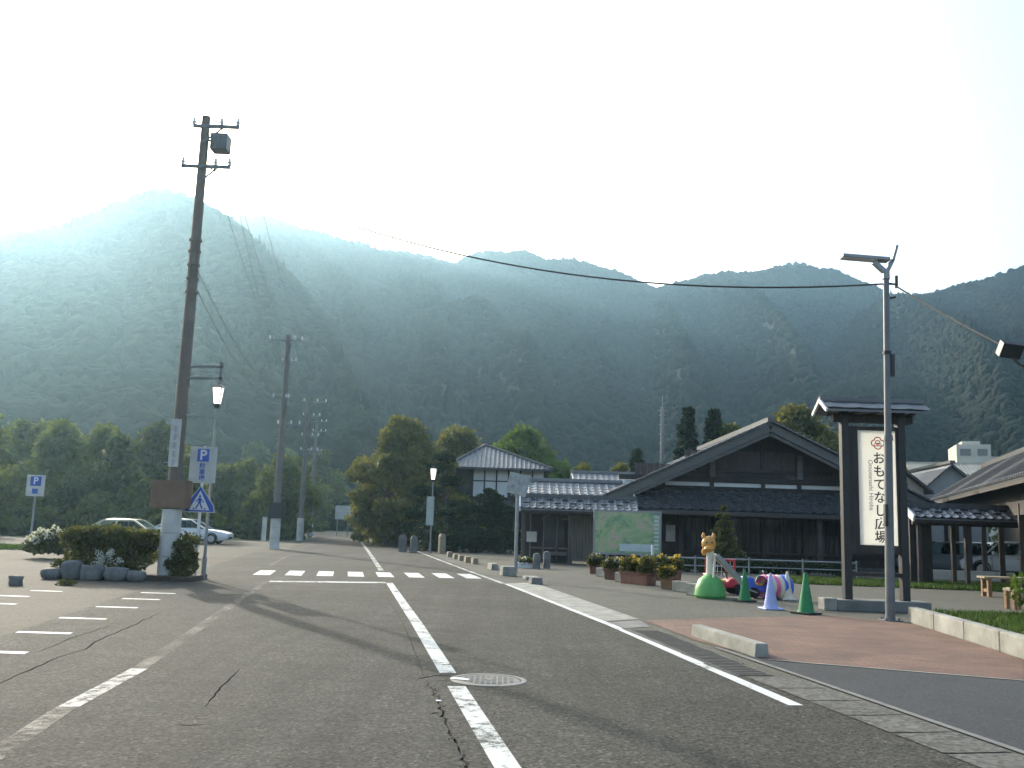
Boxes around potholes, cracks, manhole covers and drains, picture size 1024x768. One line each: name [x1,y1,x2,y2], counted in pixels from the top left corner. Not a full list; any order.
crack [206,669,240,706]
manhole cover [450,673,527,687]
